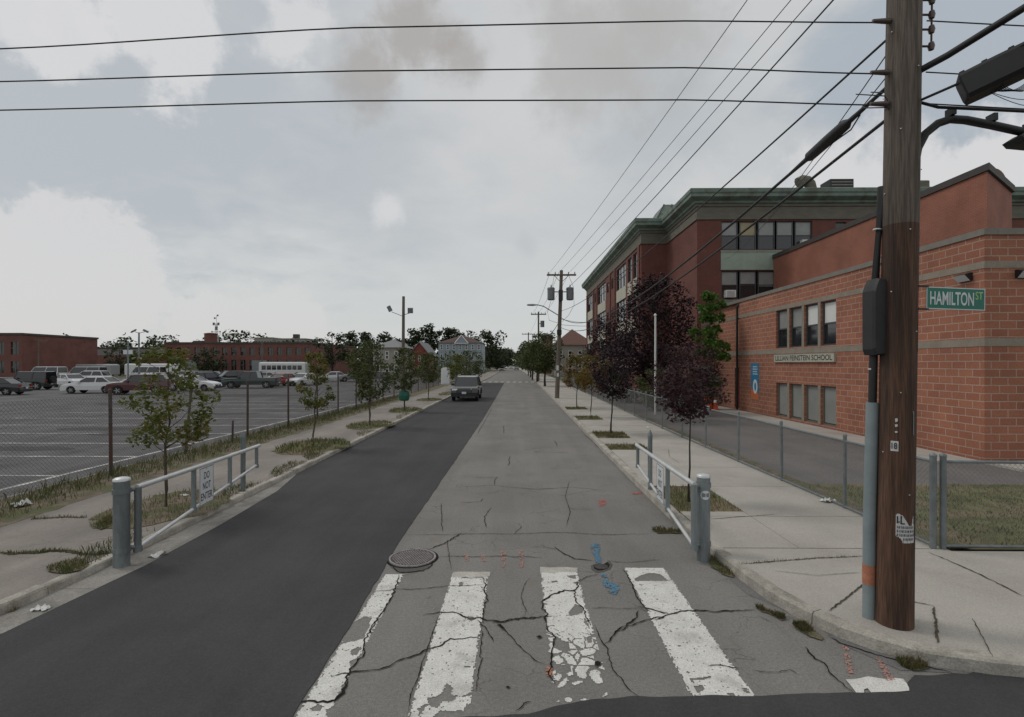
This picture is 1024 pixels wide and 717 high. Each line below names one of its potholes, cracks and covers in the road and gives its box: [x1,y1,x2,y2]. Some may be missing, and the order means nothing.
crack [756,647,853,692]
crack [466,457,609,525]
manhole cover [387,549,439,568]
